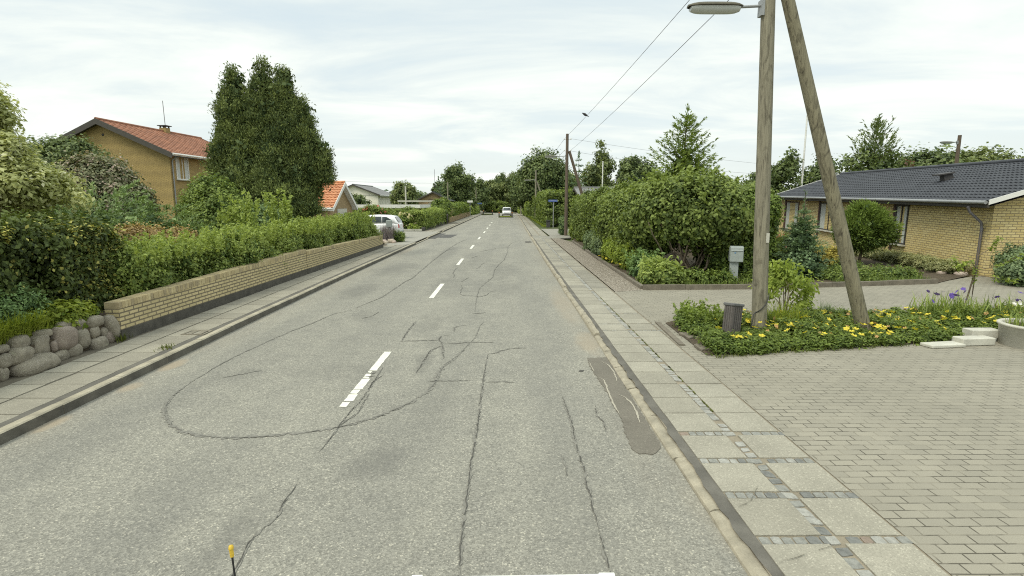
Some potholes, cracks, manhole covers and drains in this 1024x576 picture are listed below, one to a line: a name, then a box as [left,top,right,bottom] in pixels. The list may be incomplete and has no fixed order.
crack [561,396,612,572]
crack [457,348,514,576]
crack [319,369,382,452]
crack [356,242,510,381]
crack [230,485,296,576]
